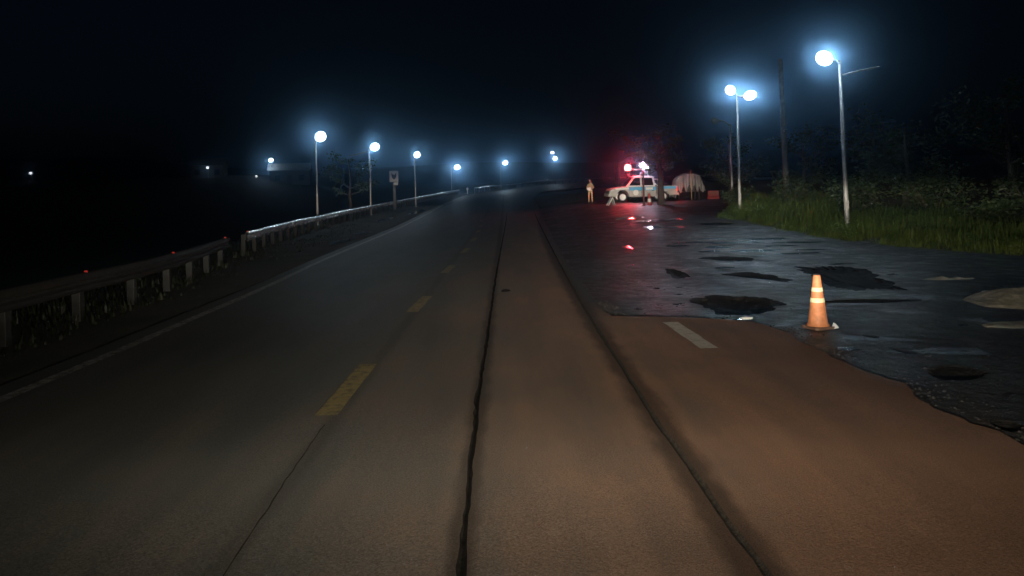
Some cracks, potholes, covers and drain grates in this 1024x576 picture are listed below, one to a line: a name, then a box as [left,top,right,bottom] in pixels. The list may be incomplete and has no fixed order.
pothole [794,266,907,291]
pothole [689,295,786,315]
pothole [665,269,690,279]
pothole [722,272,791,282]
pothole [928,365,991,381]
